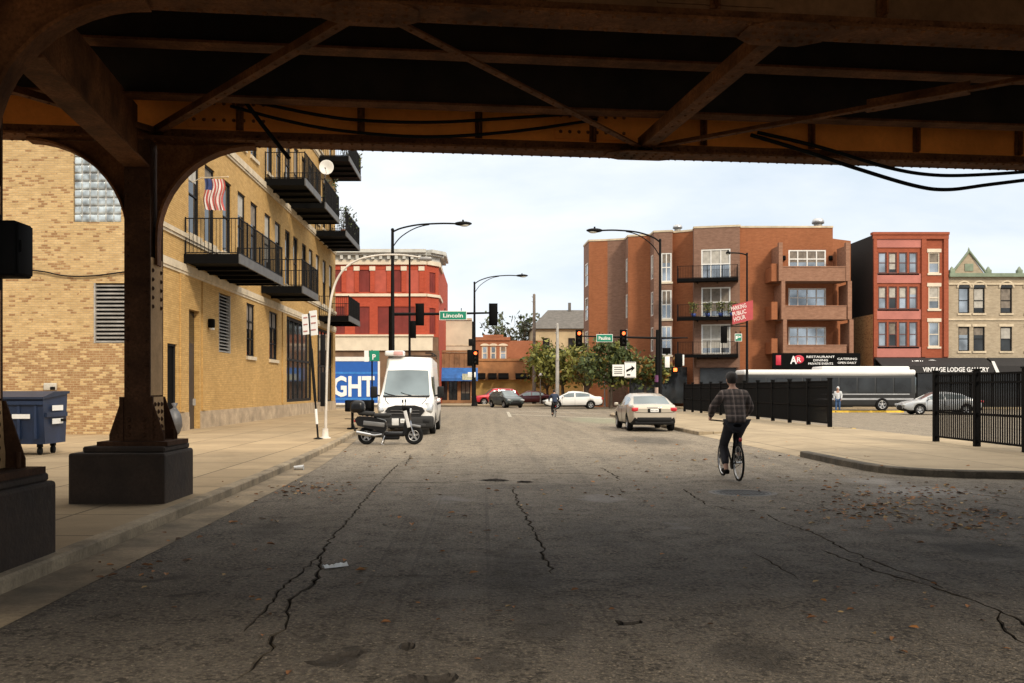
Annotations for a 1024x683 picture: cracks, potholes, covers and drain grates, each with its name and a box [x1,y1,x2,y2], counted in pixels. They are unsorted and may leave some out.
crack [237,455,632,679]
pothole [304,650,368,667]
crack [767,498,1024,643]
